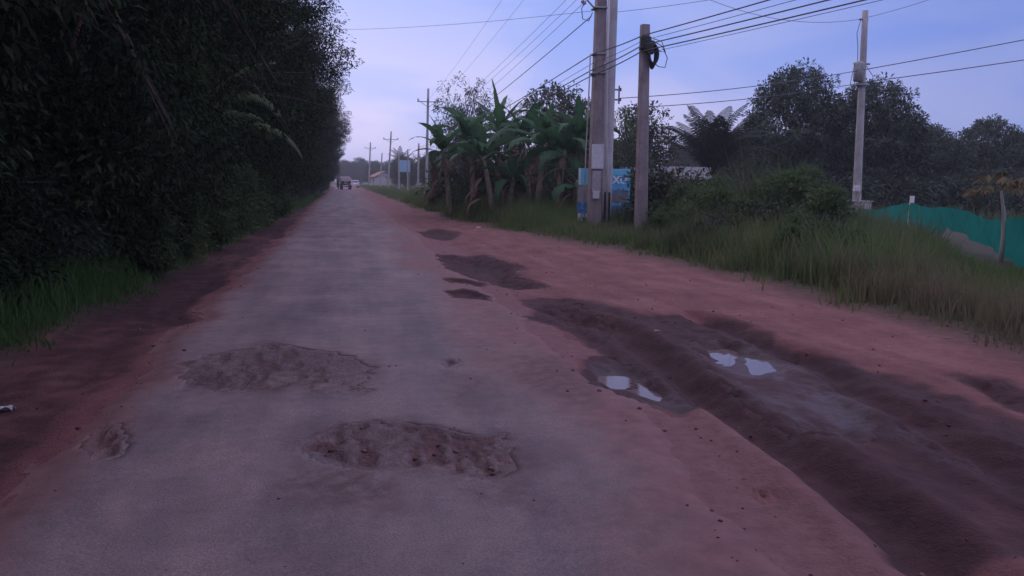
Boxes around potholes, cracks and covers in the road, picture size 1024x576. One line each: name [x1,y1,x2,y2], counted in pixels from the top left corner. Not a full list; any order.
pothole [294,420,520,480]
pothole [690,335,895,445]
pothole [435,254,549,290]
pothole [78,421,130,465]
pothole [575,357,703,418]
pothole [176,343,377,395]
pothole [440,358,463,368]
pothole [442,288,492,302]
pothole [415,228,460,241]
